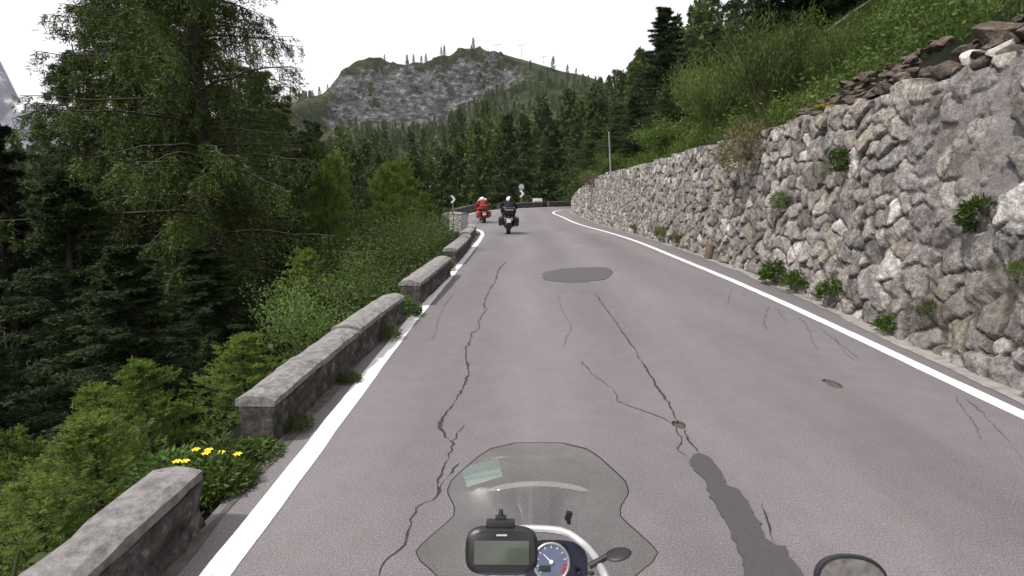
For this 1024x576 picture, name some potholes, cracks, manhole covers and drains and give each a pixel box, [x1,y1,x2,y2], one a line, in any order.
crack [556,294,698,457]
crack [763,307,859,359]
crack [379,261,507,576]
crack [762,503,773,540]
pothole [822,379,843,388]
crack [956,397,1022,458]
